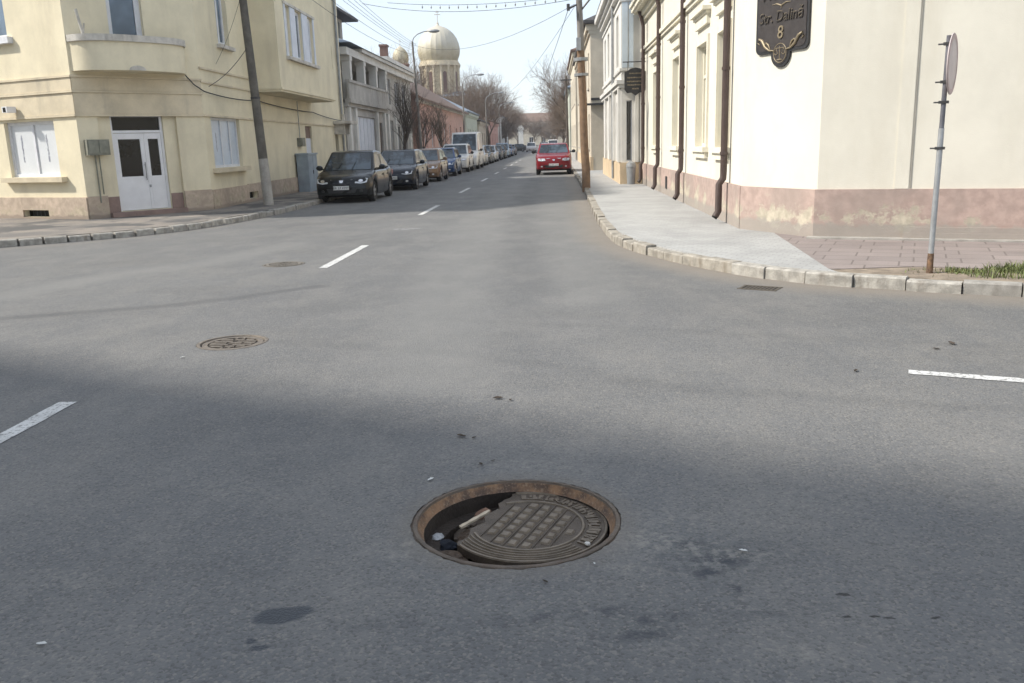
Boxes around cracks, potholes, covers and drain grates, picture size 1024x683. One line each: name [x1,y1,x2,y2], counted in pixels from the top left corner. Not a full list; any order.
manhole cover [196,334,268,350]
manhole cover [410,479,621,570]
